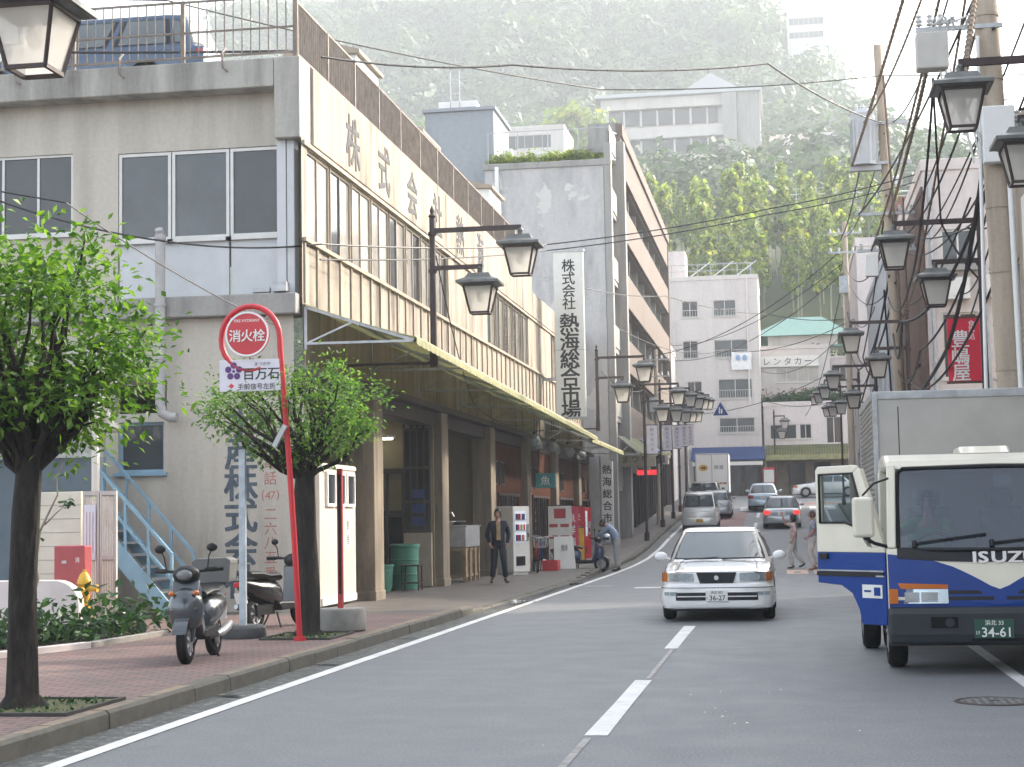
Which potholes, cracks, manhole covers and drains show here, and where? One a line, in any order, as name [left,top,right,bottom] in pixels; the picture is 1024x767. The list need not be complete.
manhole cover [954,697,1024,706]
